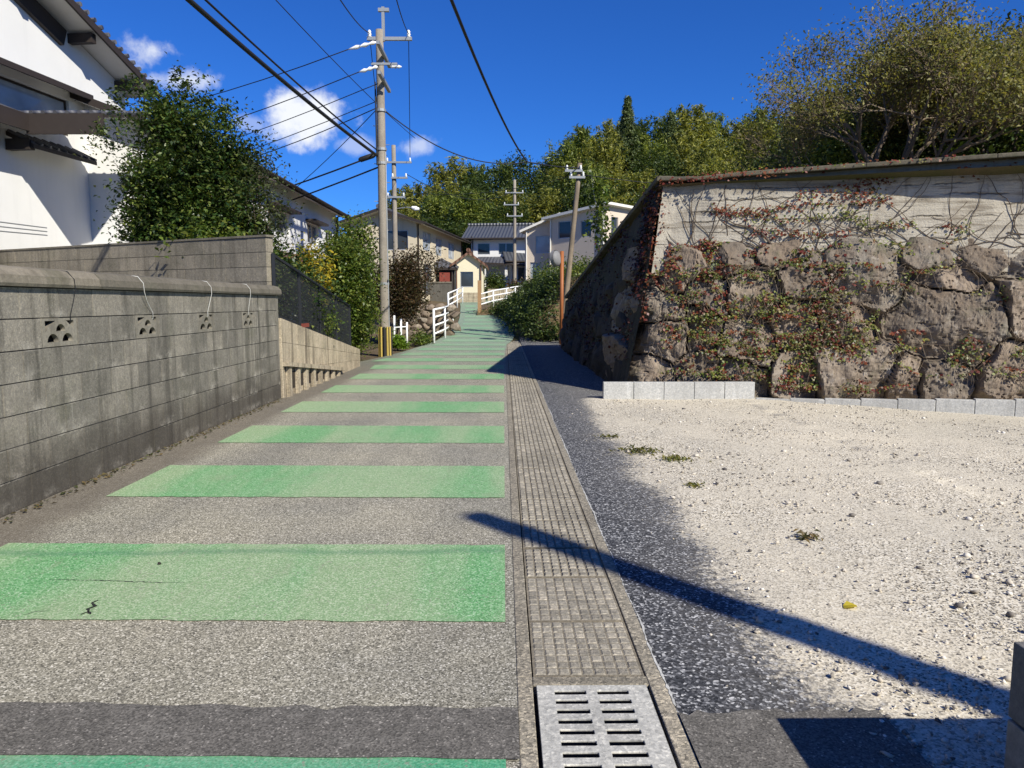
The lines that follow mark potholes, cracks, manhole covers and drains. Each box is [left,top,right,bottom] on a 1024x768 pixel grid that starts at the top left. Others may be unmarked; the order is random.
drain grate [536,685,677,768]
